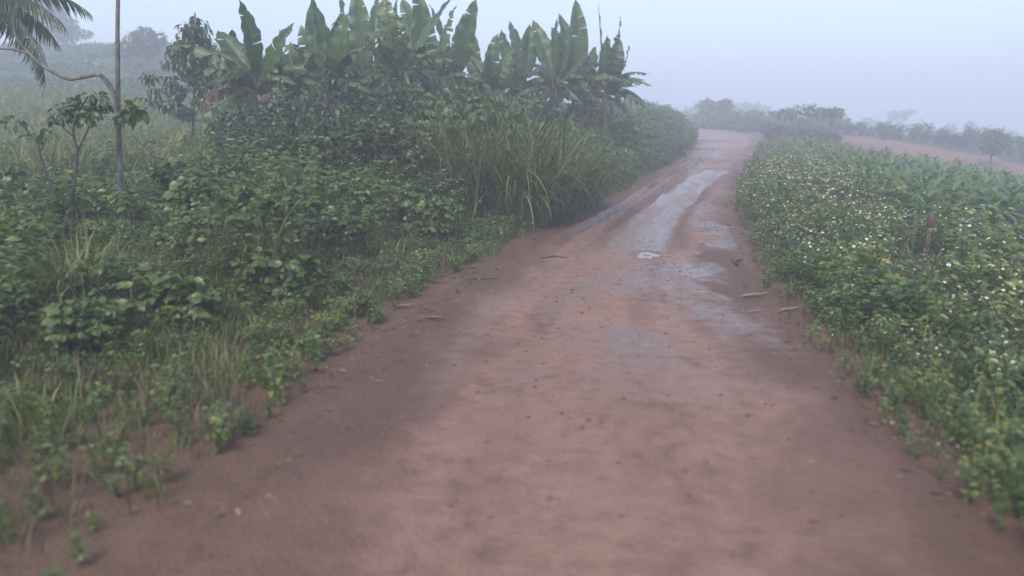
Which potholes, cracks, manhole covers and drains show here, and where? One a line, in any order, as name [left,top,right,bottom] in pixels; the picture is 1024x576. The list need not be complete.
pothole [629,249,667,260]
